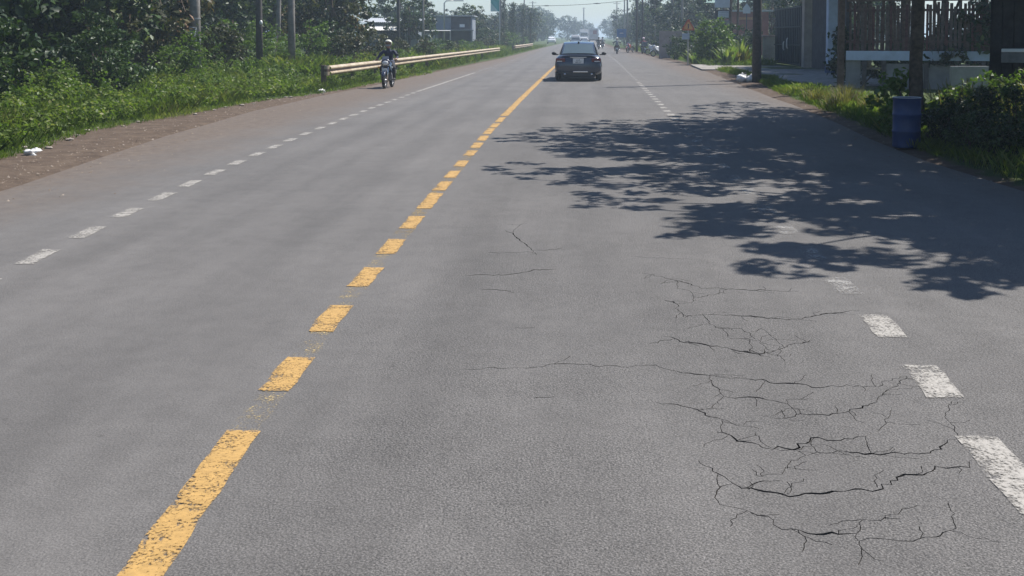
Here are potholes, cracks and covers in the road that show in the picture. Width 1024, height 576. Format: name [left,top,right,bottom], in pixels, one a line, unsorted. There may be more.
crack [469,356,995,565]
crack [467,224,555,292]
crack [644,273,857,361]
